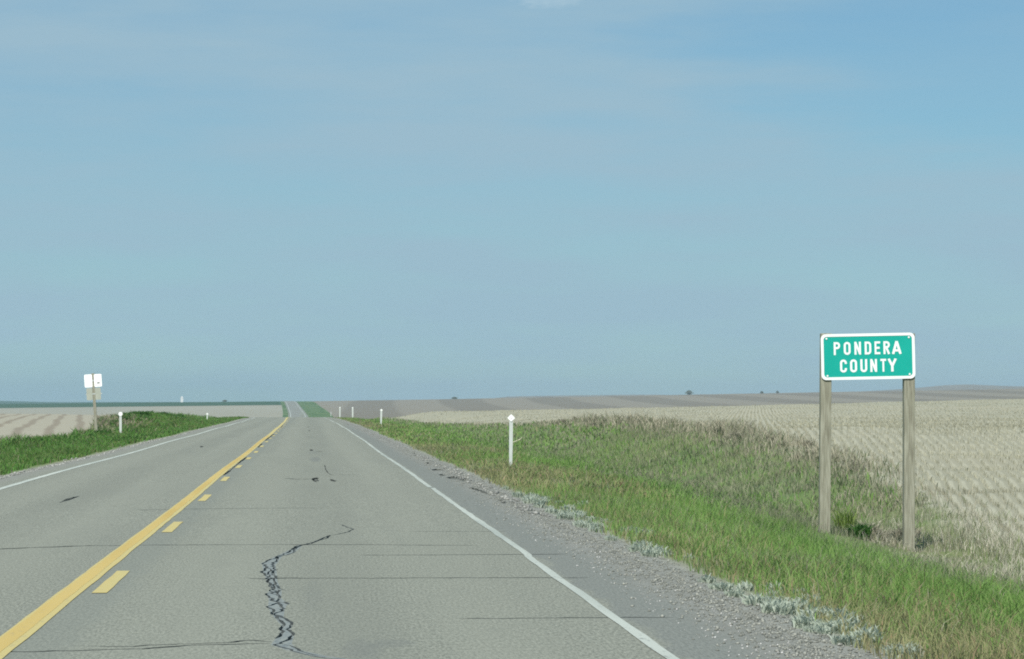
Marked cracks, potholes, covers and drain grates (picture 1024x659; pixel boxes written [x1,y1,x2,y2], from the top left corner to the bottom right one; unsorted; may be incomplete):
crack [4,524,577,659]
